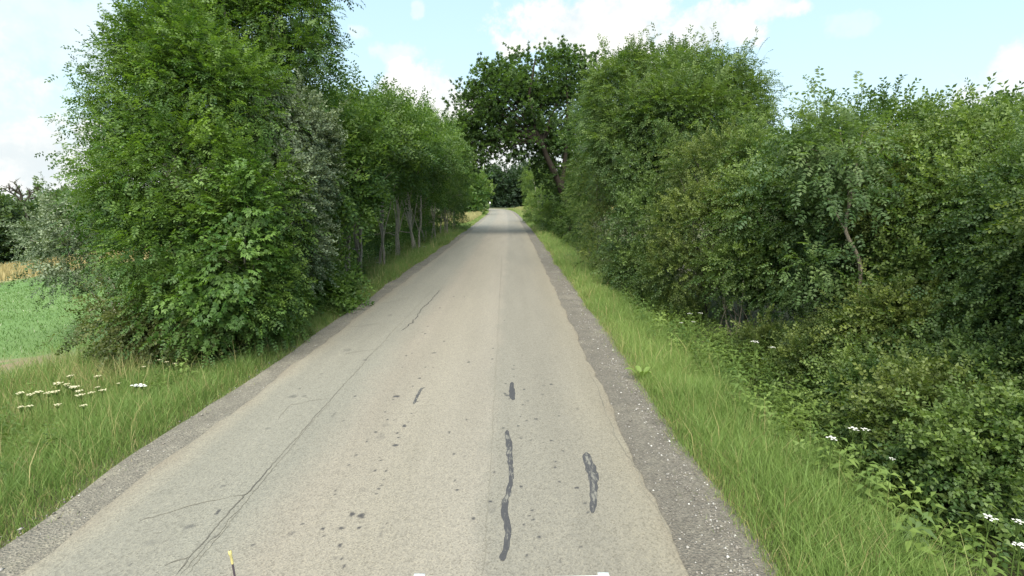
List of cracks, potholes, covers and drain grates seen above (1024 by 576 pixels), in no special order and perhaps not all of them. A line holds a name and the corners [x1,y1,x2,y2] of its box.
crack [140,282,440,574]
